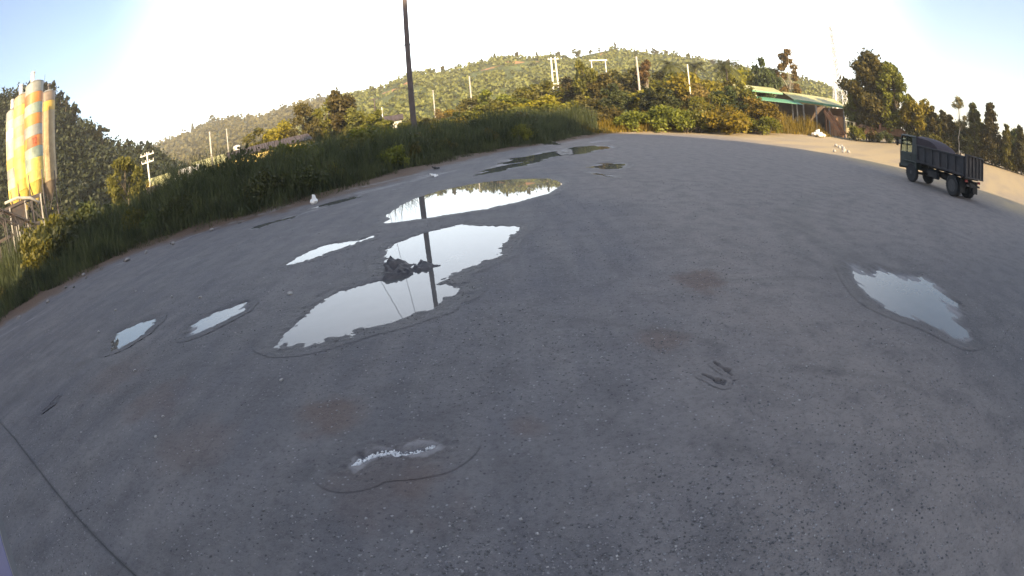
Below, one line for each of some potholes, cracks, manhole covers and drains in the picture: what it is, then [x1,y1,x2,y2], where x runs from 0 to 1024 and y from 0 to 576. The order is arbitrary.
pothole [175,298,259,342]
pothole [556,145,621,156]
pothole [580,162,636,170]
pothole [311,420,481,493]
pothole [367,176,575,227]
pothole [465,149,574,177]
pothole [99,312,167,357]
pothole [252,220,539,358]
crack [39,393,62,414]
pothole [832,257,988,351]
